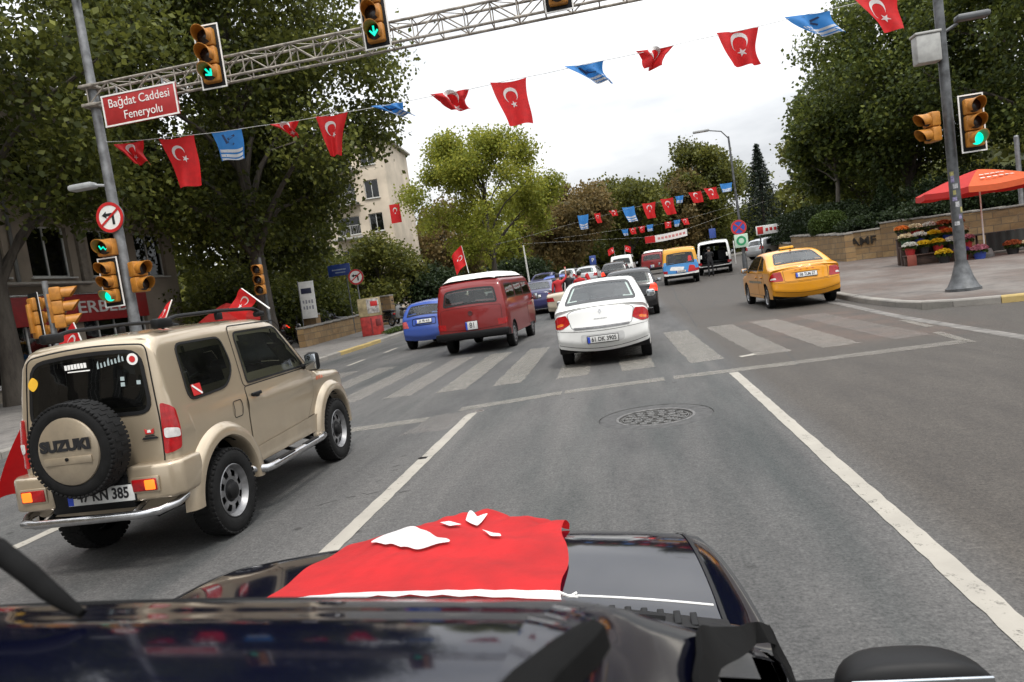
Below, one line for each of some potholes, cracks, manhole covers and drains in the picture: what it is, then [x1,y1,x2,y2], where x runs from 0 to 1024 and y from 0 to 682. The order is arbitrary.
manhole cover [599,404,714,430]
